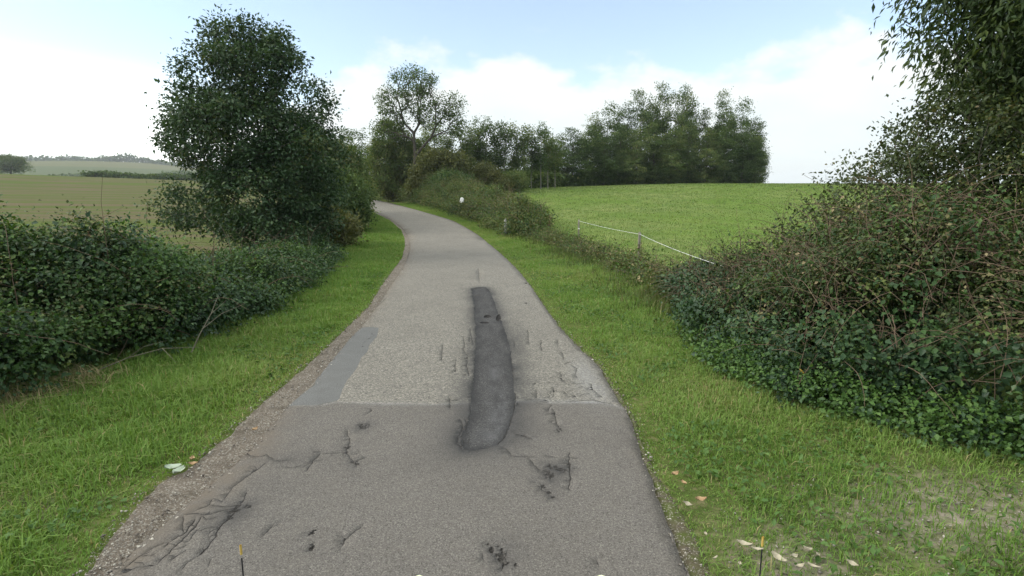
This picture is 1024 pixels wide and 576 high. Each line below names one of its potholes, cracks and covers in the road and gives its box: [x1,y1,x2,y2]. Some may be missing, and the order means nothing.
crack [536,353,609,432]
crack [120,408,372,574]
crack [497,354,572,498]
pothole [487,543,517,572]
